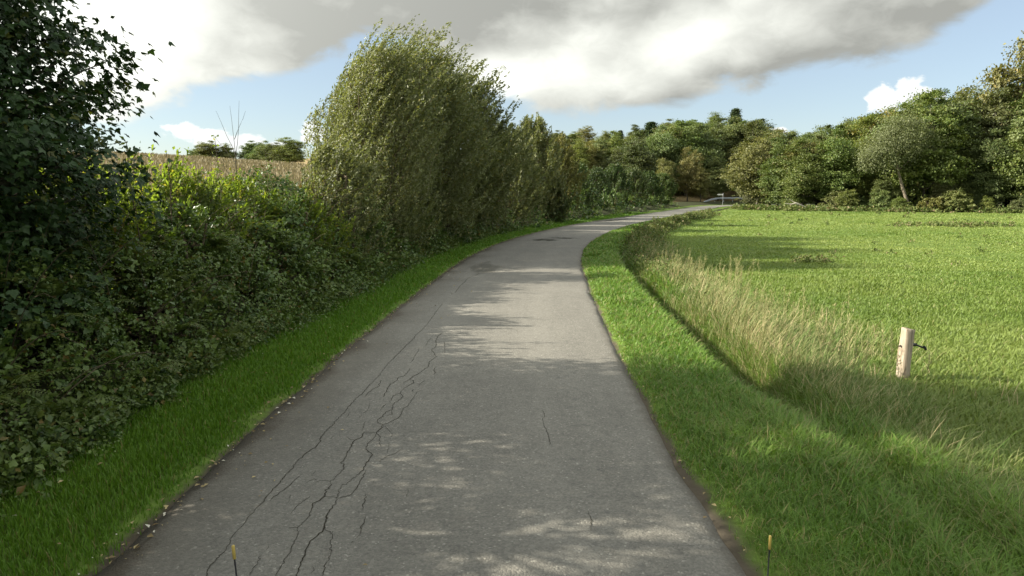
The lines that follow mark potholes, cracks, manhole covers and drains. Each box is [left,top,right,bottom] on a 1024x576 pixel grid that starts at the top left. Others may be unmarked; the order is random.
crack [206,303,445,576]
